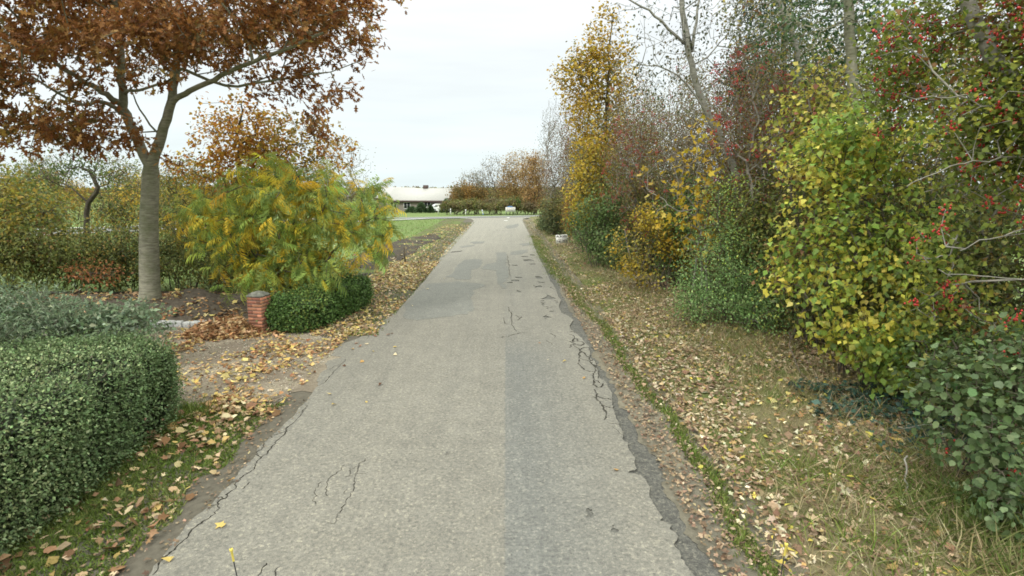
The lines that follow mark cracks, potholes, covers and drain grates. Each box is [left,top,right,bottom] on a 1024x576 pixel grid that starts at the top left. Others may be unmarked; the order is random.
crack [312,458,368,524]
crack [551,331,621,434]
